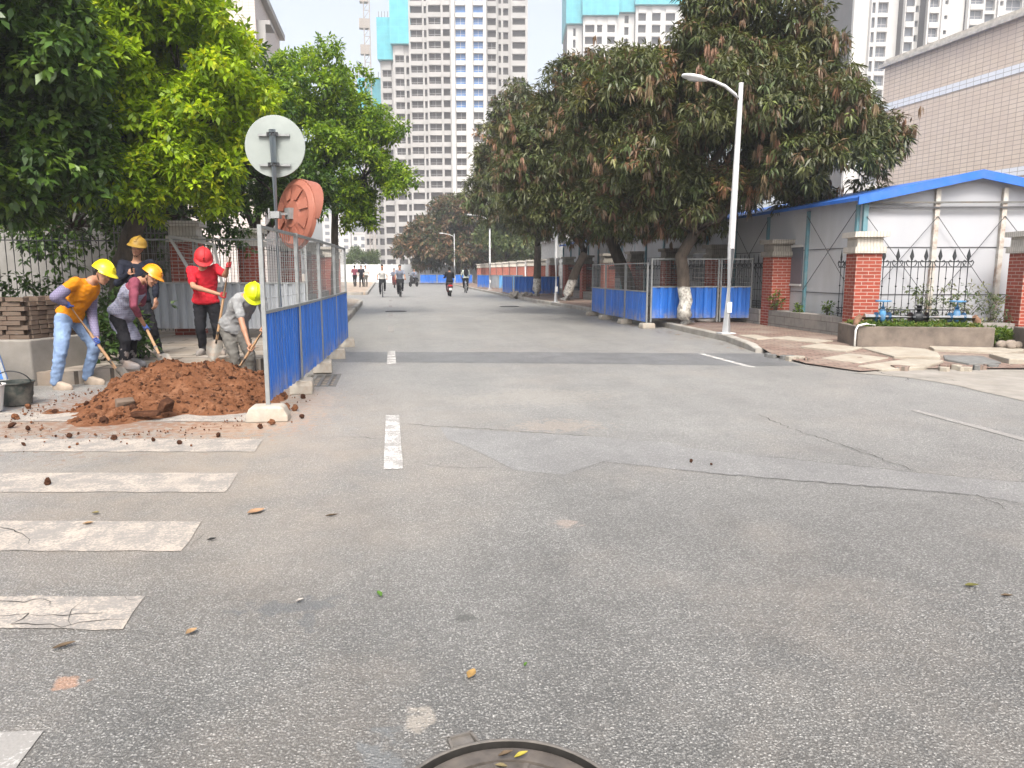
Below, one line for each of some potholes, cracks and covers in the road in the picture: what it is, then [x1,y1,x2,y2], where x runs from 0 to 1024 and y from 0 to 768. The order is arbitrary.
manhole cover [415,730,603,768]
crack [680,418,1024,510]
drain grate [307,374,341,387]
